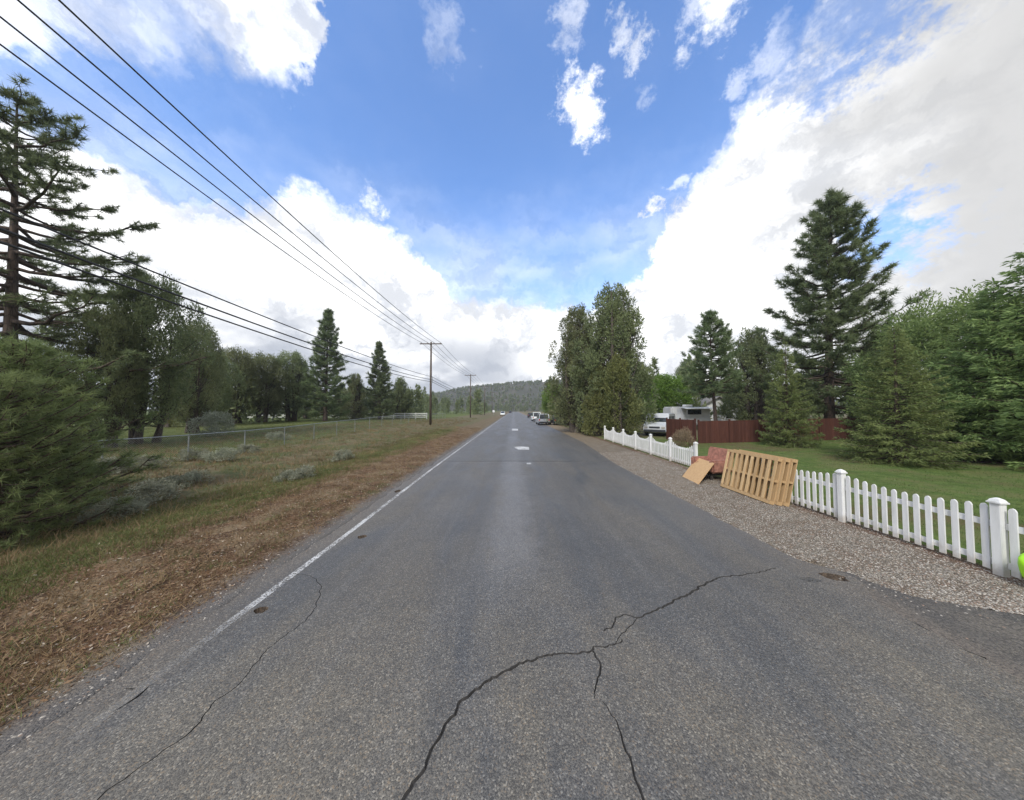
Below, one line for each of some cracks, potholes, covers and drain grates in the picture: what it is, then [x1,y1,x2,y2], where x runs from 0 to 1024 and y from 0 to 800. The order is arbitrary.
crack [401,568,776,800]
crack [97,574,322,800]
pothole [818,572,849,581]
